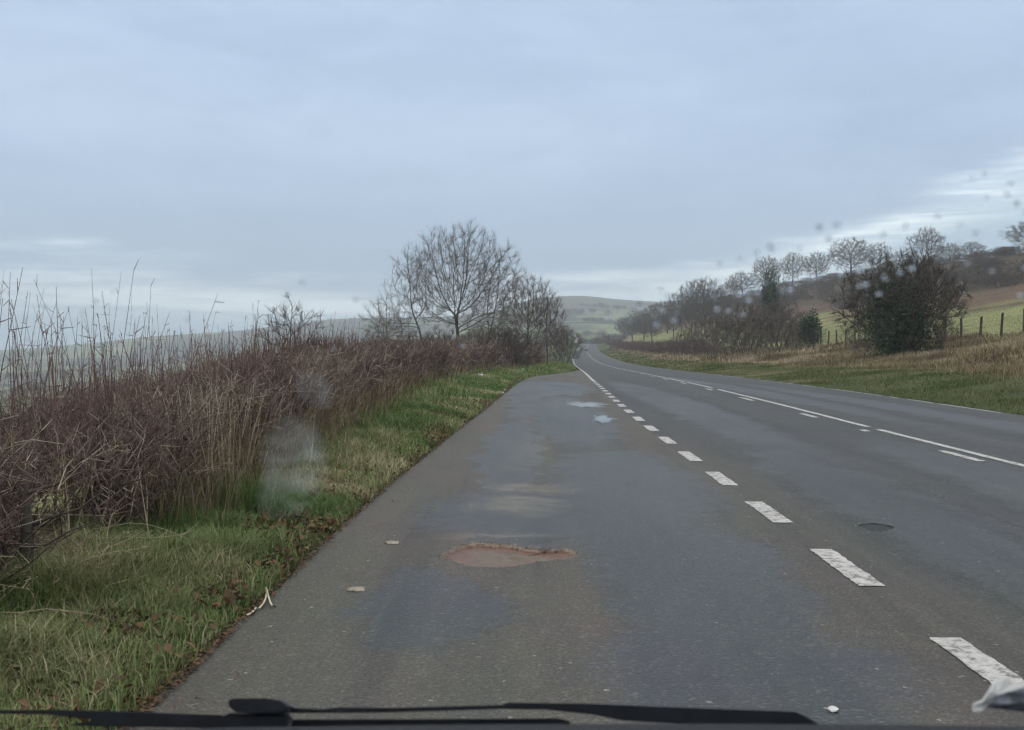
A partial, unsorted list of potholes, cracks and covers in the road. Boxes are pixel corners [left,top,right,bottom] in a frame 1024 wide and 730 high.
pothole [855,523,894,532]
pothole [438,541,585,568]
